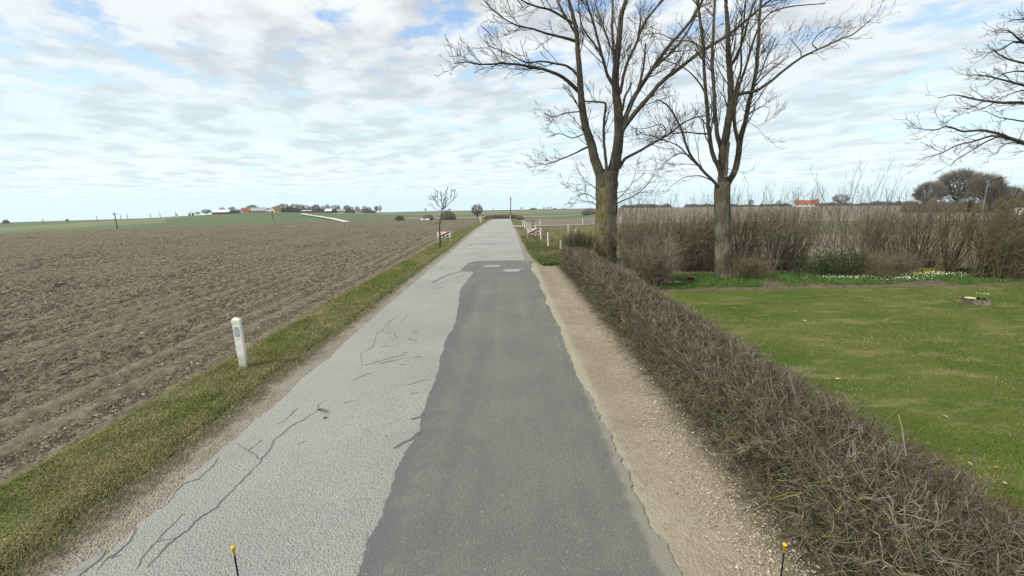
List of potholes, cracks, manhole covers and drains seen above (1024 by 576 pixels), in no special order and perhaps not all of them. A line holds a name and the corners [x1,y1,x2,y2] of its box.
crack [356,318,421,394]
crack [99,400,326,570]
